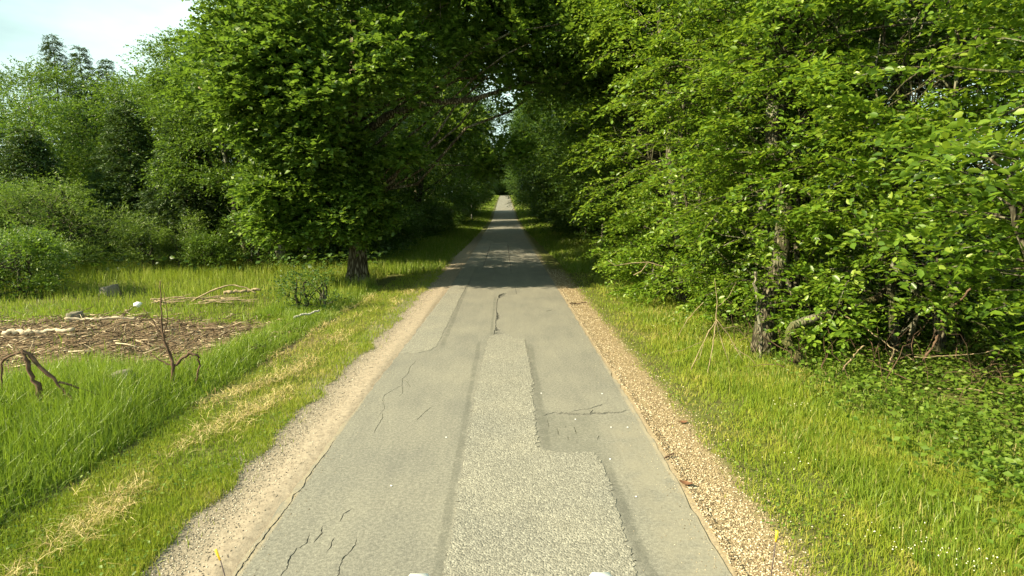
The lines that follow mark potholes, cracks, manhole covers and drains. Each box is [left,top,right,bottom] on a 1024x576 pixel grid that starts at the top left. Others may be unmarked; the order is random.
crack [544,403,626,440]
crack [374,364,431,433]
crack [235,435,357,576]
